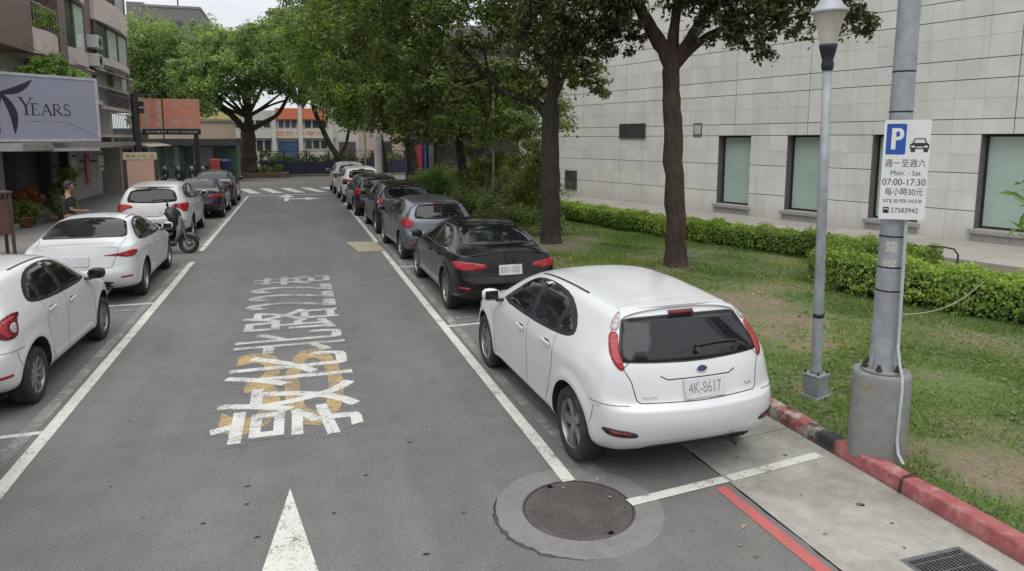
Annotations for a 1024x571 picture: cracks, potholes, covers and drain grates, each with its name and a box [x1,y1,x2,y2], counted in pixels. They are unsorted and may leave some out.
drain grate [900,546,998,571]
manhole cover [495,468,665,561]
